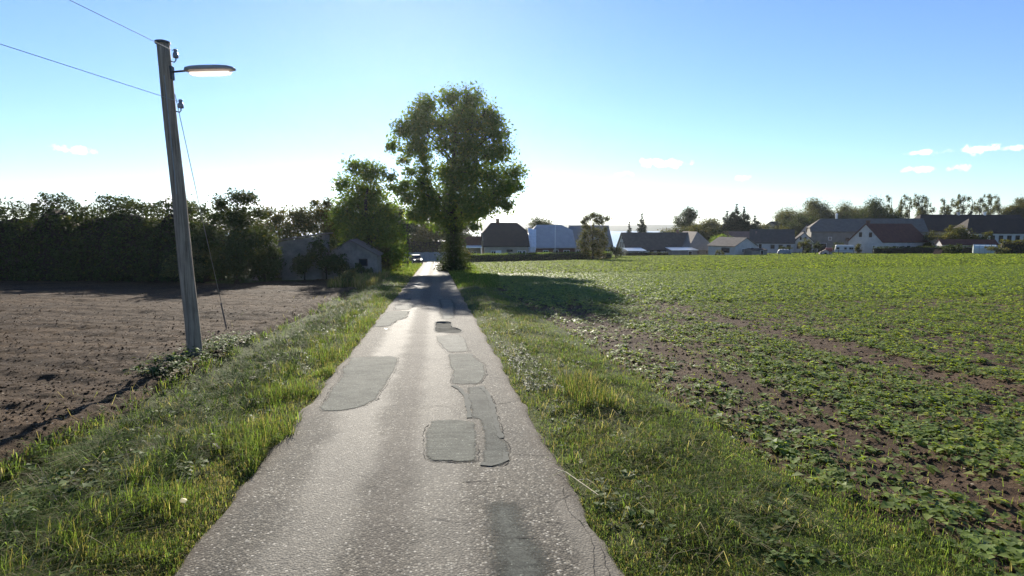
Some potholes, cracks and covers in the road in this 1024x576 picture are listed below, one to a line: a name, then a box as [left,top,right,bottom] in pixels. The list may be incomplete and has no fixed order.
crack [517,484,610,576]
pothole [433,321,463,333]
